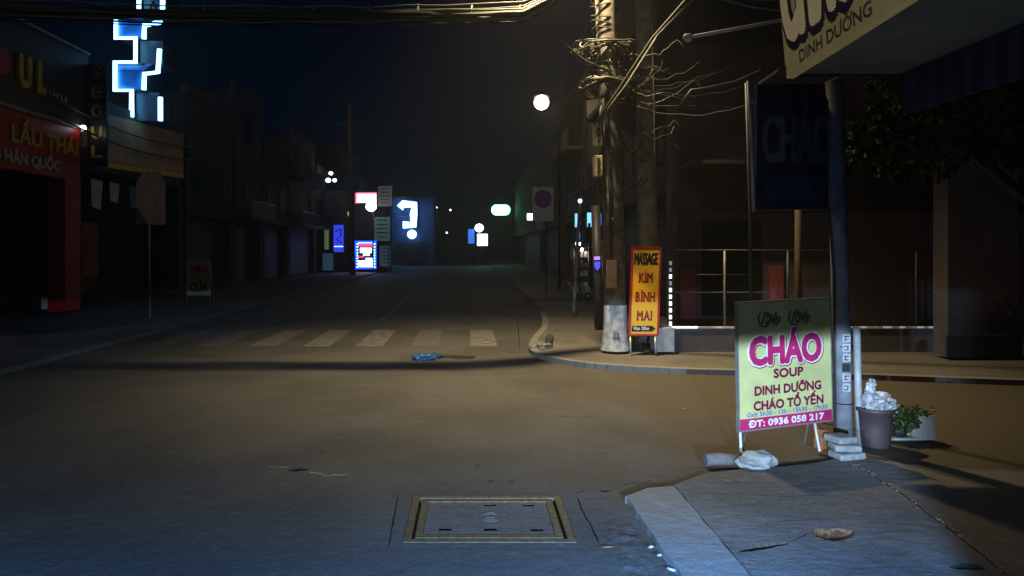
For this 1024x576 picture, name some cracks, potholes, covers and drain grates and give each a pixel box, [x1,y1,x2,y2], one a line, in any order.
manhole cover [402,496,577,543]
